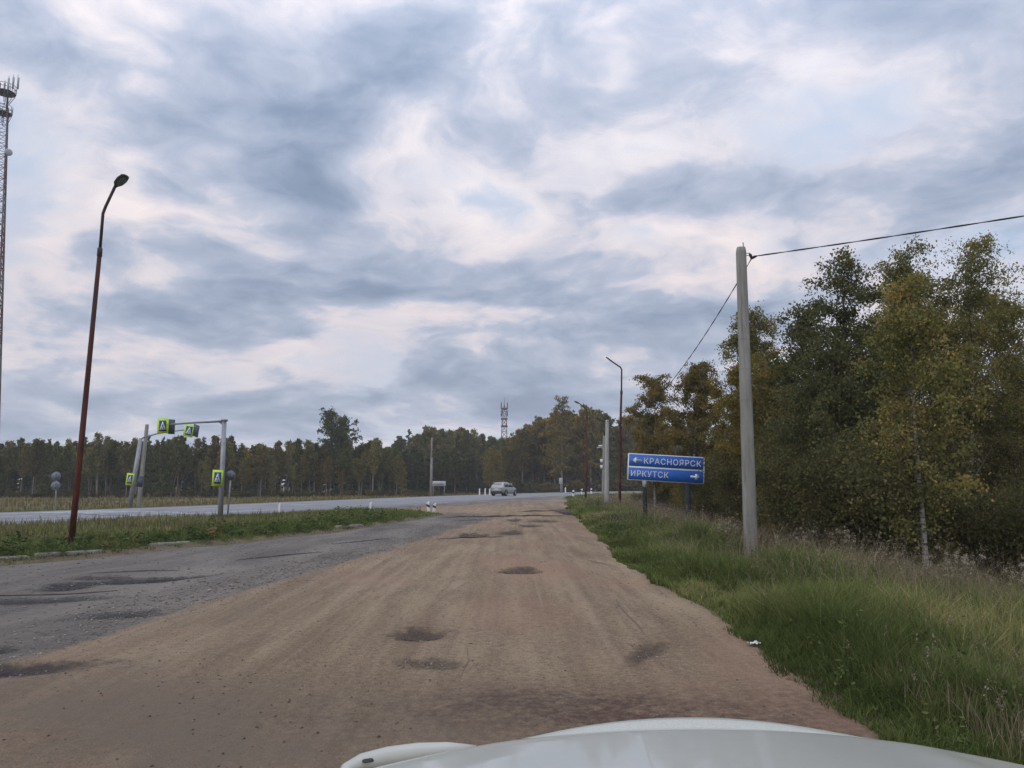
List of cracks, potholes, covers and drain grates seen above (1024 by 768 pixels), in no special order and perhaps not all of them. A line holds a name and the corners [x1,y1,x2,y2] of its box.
pothole [397,629,443,642]
